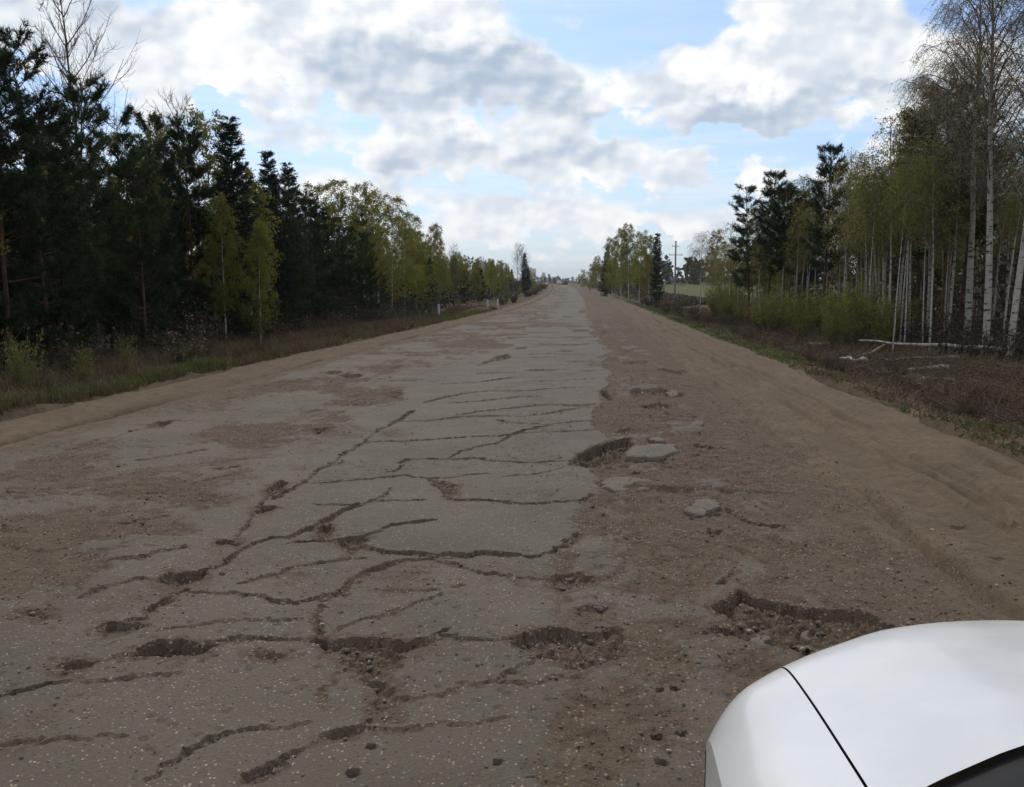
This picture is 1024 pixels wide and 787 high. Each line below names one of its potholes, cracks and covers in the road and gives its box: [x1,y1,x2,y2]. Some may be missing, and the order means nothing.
crack [4,651,183,697]
pothole [54,659,97,671]
crack [77,325,605,785]
pothole [156,568,209,587]
pothole [699,589,896,656]
pothole [130,639,220,659]
pothole [93,621,150,635]
pothole [509,625,638,674]
pothole [570,437,634,468]
pothole [313,637,427,682]
